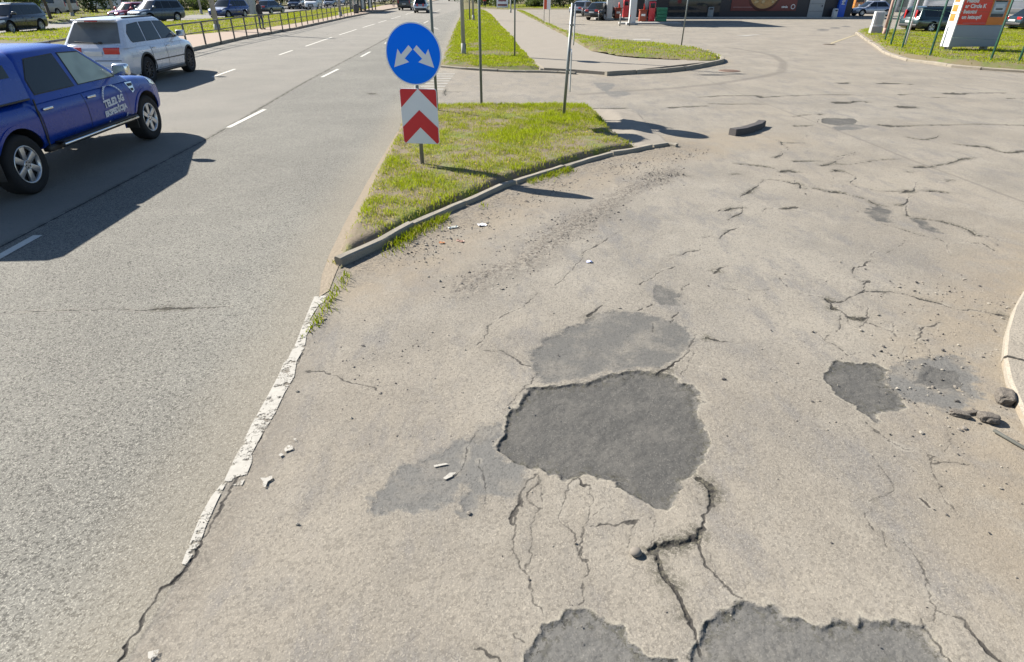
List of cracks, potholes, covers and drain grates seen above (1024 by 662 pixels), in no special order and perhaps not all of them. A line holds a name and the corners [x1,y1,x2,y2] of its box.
crack [635,82,1024,375]
crack [507,473,744,659]
pothole [823,360,907,424]
pothole [523,608,679,662]
pothole [497,370,711,511]
pothole [688,600,947,662]
crack [0,306,231,314]
